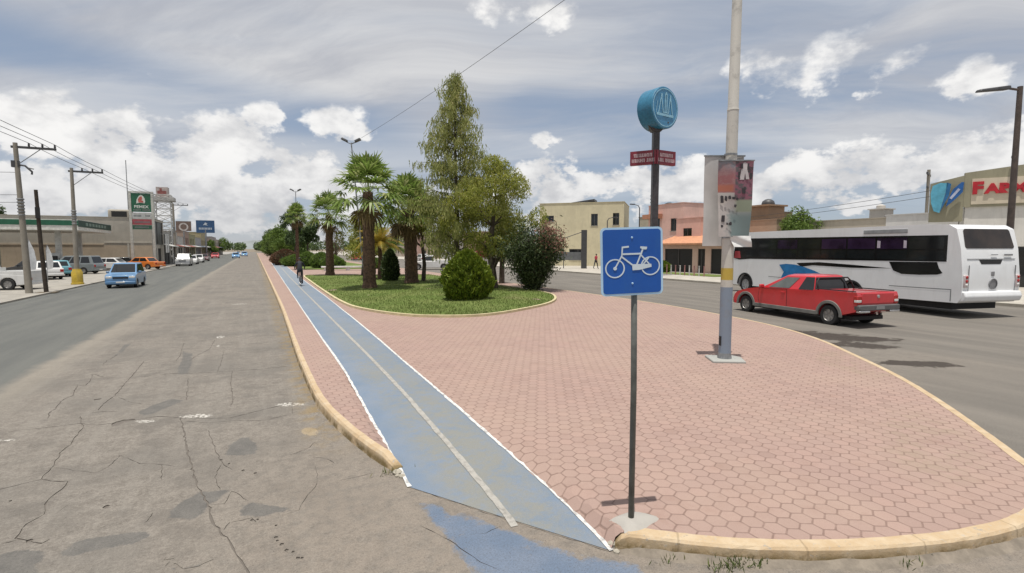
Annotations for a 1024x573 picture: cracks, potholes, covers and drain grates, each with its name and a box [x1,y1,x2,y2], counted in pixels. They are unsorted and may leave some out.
crack [1,337,298,573]
